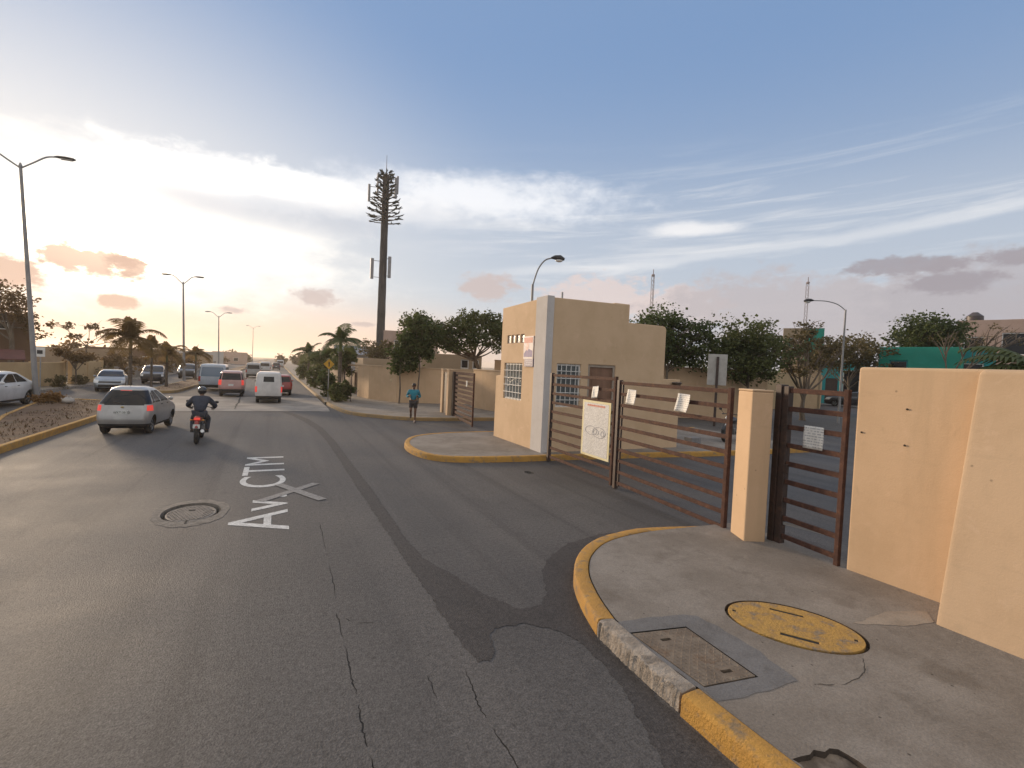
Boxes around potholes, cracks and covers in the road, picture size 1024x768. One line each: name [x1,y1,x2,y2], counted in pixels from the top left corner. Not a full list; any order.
pothole [793,748,867,768]
crack [320,524,373,768]
crack [465,670,519,768]
crack [823,659,866,685]
manhole cover [725,601,870,655]
utility cover [630,626,758,695]
manhole cover [150,499,230,528]
